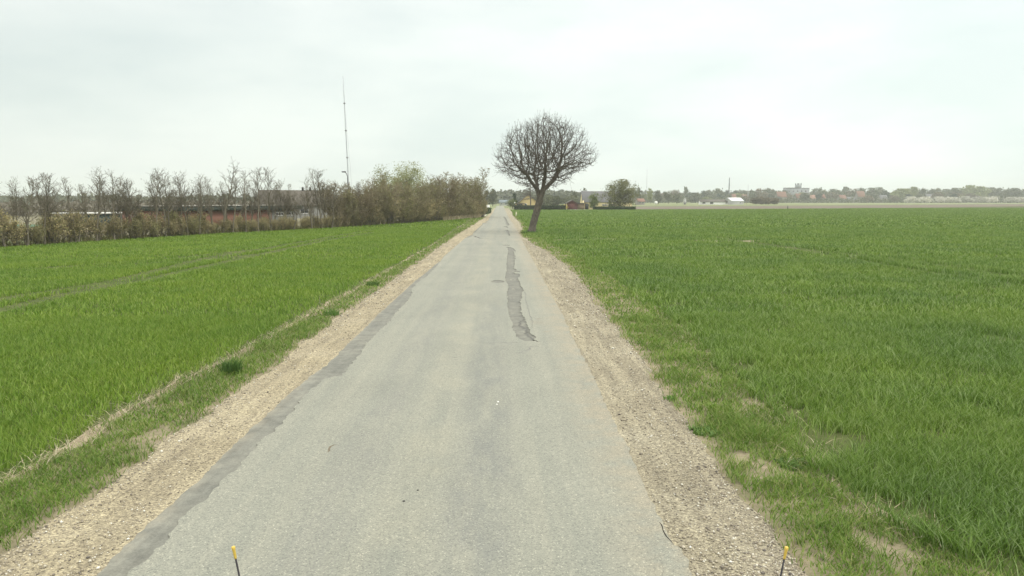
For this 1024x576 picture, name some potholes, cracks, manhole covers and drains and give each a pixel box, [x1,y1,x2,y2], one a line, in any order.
crack [512,291,538,352]
